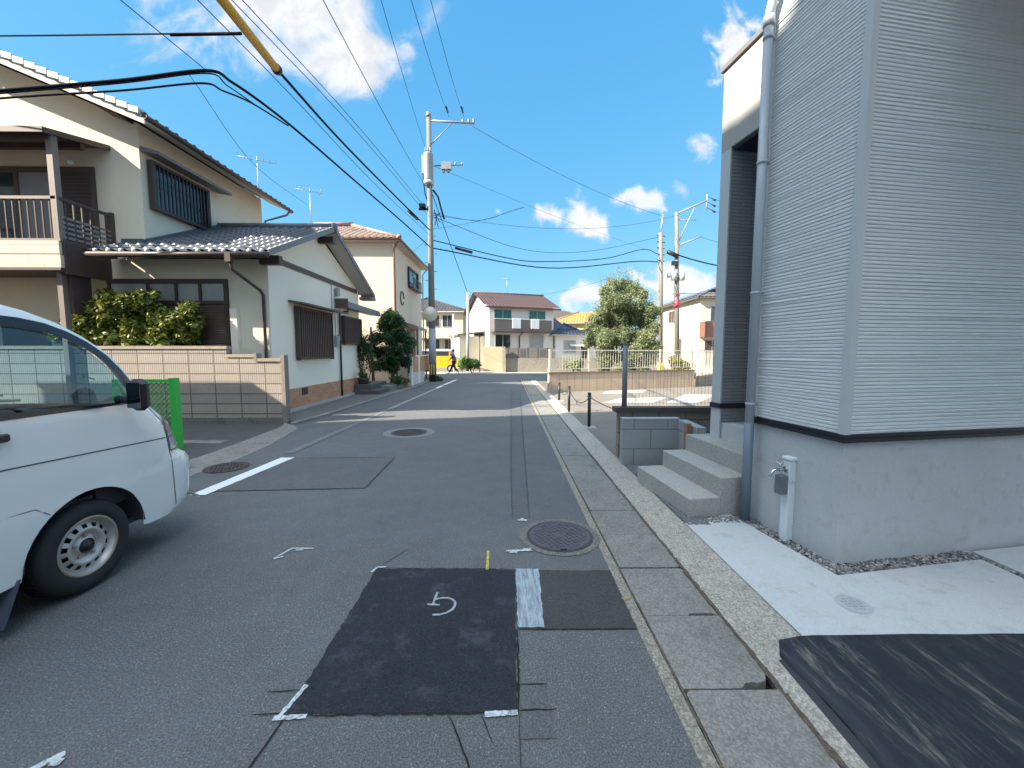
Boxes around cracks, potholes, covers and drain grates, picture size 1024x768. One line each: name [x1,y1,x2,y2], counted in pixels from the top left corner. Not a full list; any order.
manhole cover [202,462,250,473]
crack [447,715,493,768]
manhole cover [519,519,601,556]
manhole cover [383,428,435,438]
